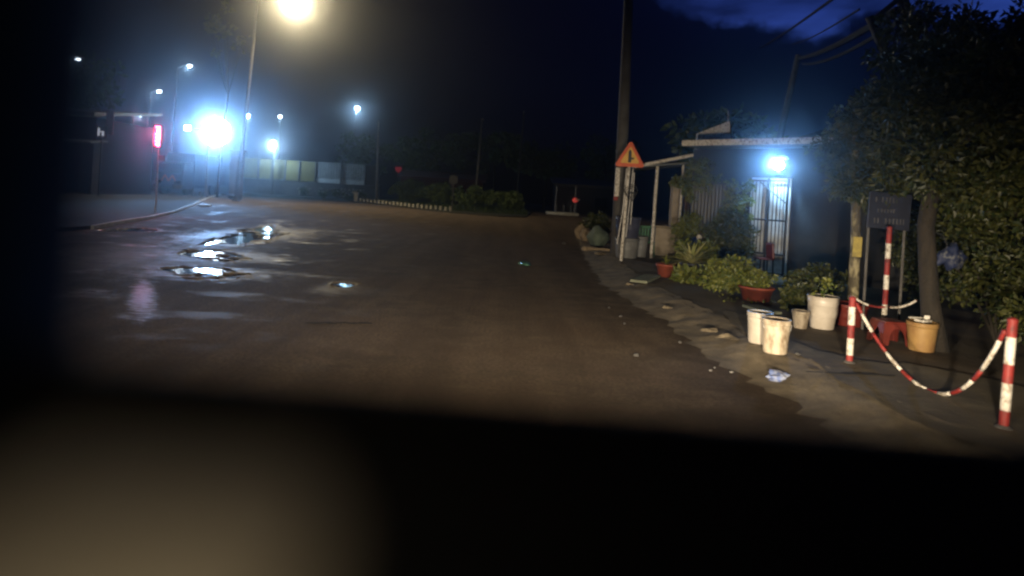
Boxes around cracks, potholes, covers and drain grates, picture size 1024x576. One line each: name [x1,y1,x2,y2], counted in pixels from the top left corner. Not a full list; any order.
pothole [152,265,255,281]
pothole [187,224,290,248]
pothole [170,248,253,263]
